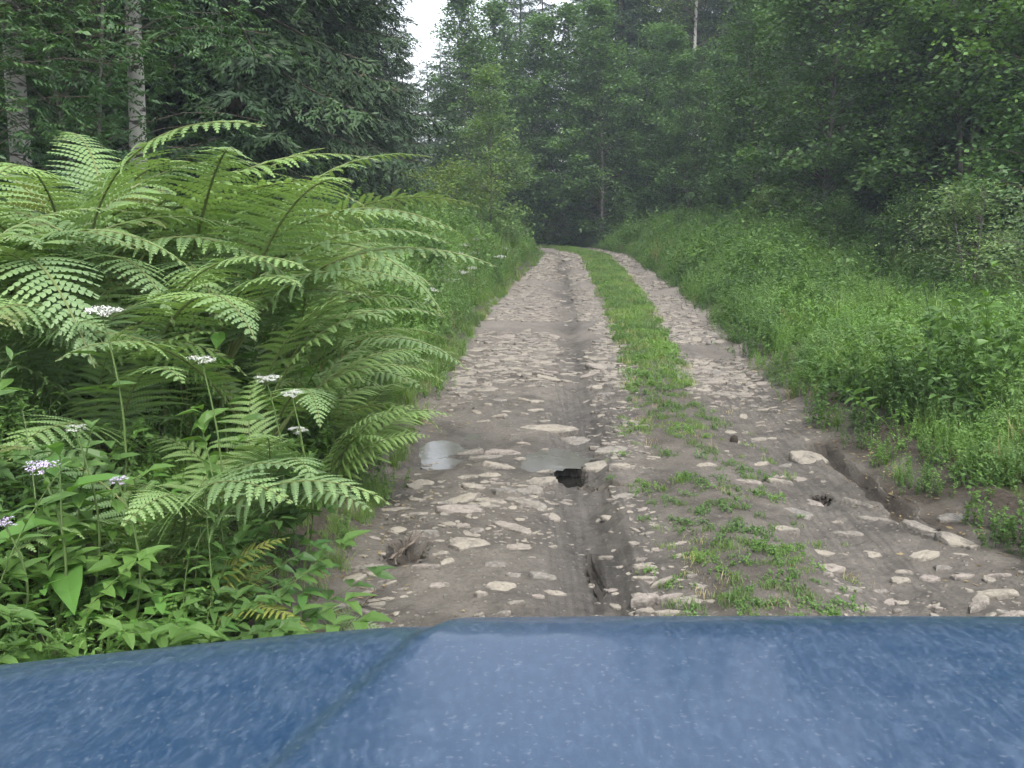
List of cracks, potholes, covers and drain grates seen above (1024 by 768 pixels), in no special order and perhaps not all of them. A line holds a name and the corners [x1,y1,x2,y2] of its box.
pothole [810,494,835,506]
pothole [377,536,432,571]
pothole [548,468,589,491]
